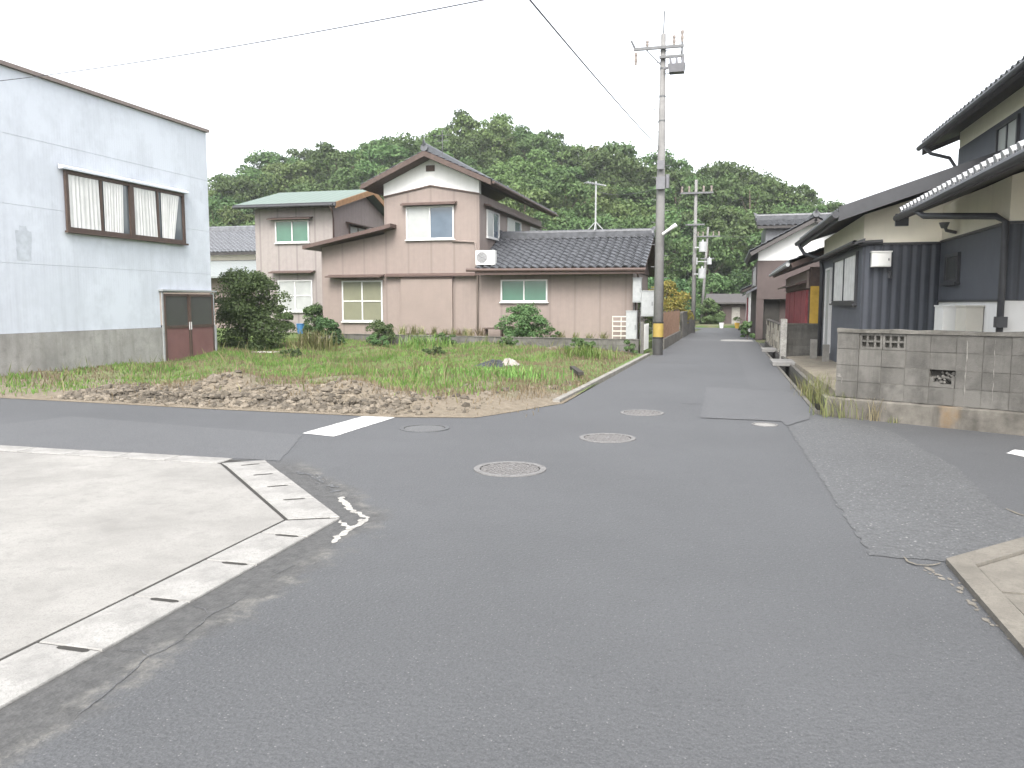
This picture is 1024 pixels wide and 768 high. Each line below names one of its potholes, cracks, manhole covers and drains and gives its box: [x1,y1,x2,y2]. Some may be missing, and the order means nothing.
manhole cover [579,433,636,443]
manhole cover [474,461,546,477]
crack [903,556,1010,640]
manhole cover [400,424,449,433]
crack [81,565,293,712]
